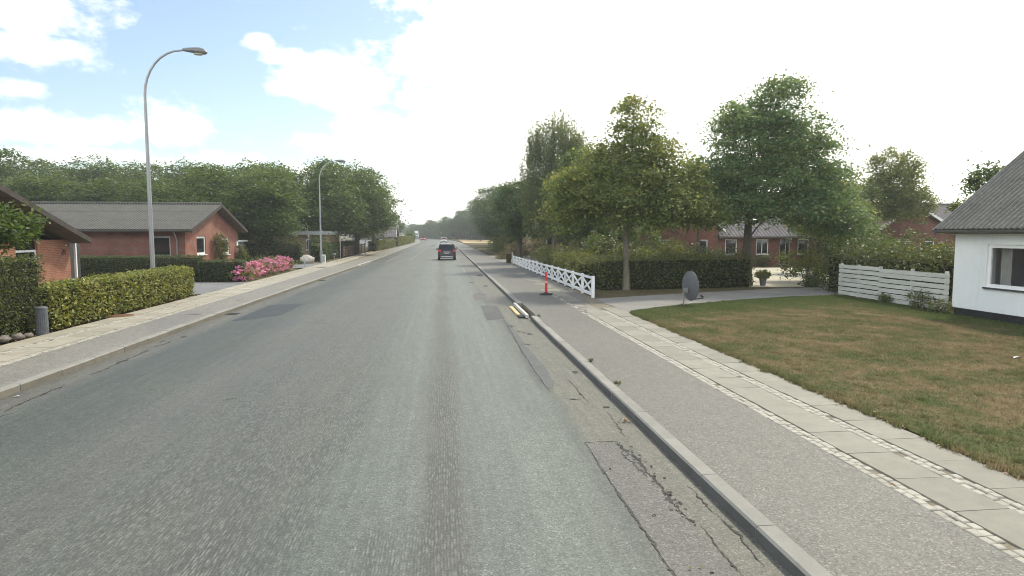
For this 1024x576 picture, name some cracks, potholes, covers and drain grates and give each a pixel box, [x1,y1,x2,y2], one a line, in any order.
crack [585,413,765,576]
